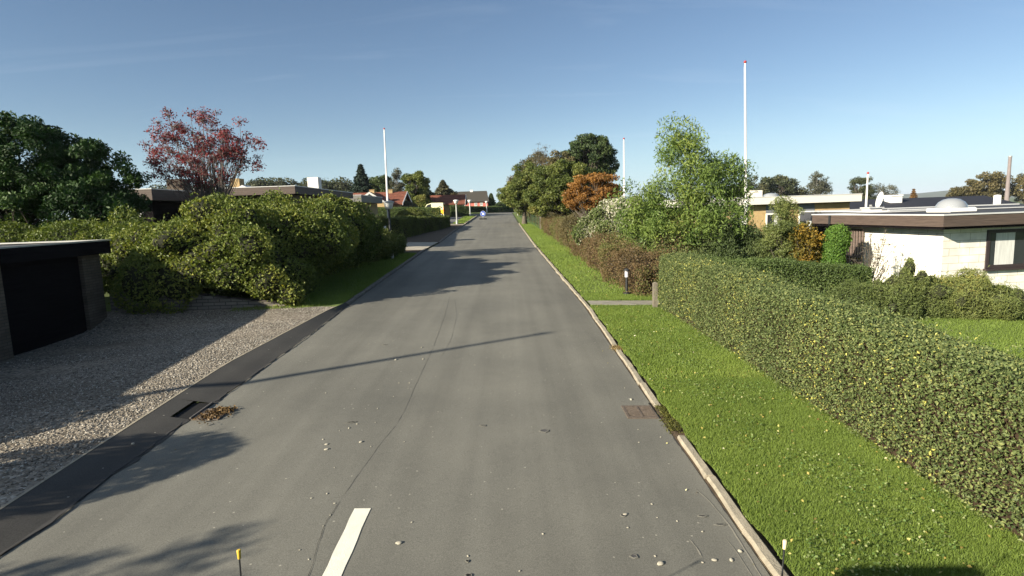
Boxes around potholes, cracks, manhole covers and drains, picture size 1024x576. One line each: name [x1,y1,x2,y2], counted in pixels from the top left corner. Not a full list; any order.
drain grate [174,402,227,421]
